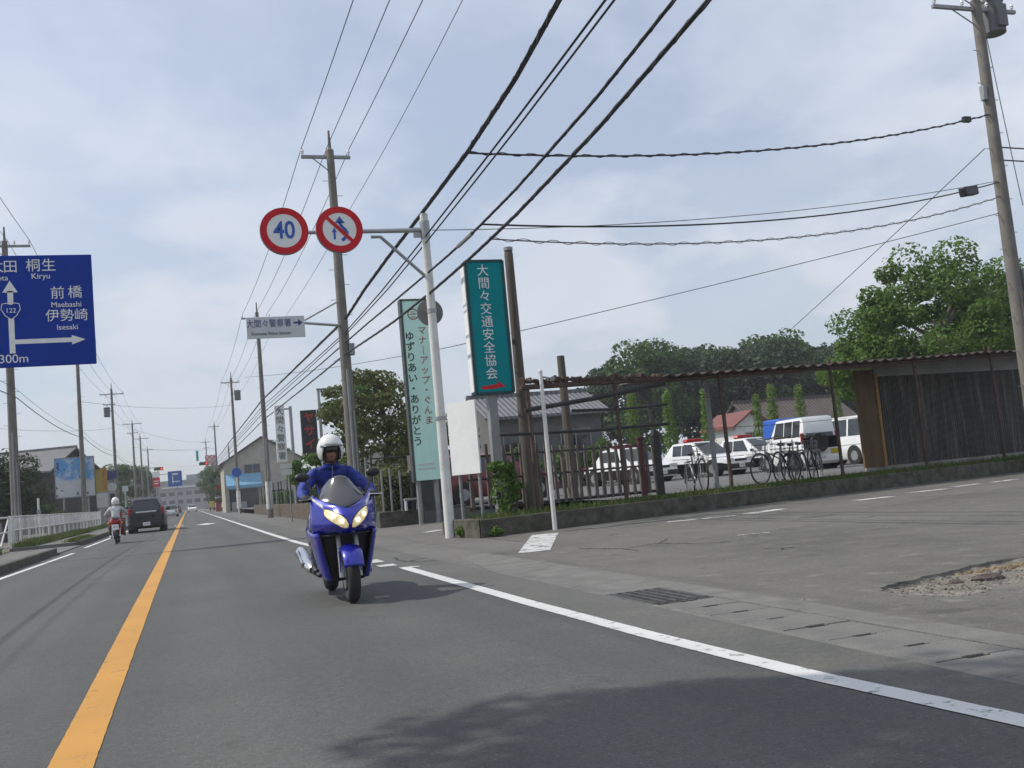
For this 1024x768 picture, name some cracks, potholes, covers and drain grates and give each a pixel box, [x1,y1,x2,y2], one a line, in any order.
drain grate [606,587,713,605]
crack [604,539,731,551]
